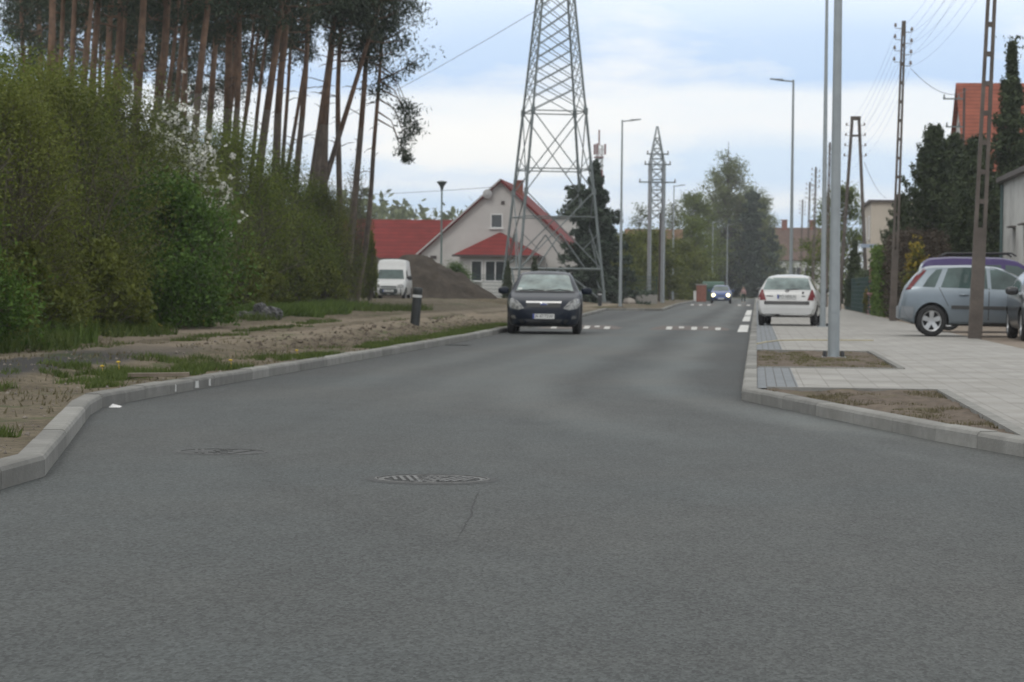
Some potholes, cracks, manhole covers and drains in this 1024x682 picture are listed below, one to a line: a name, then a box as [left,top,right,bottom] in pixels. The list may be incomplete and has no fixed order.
crack [458,494,478,537]
manhole cover [365,474,499,485]
